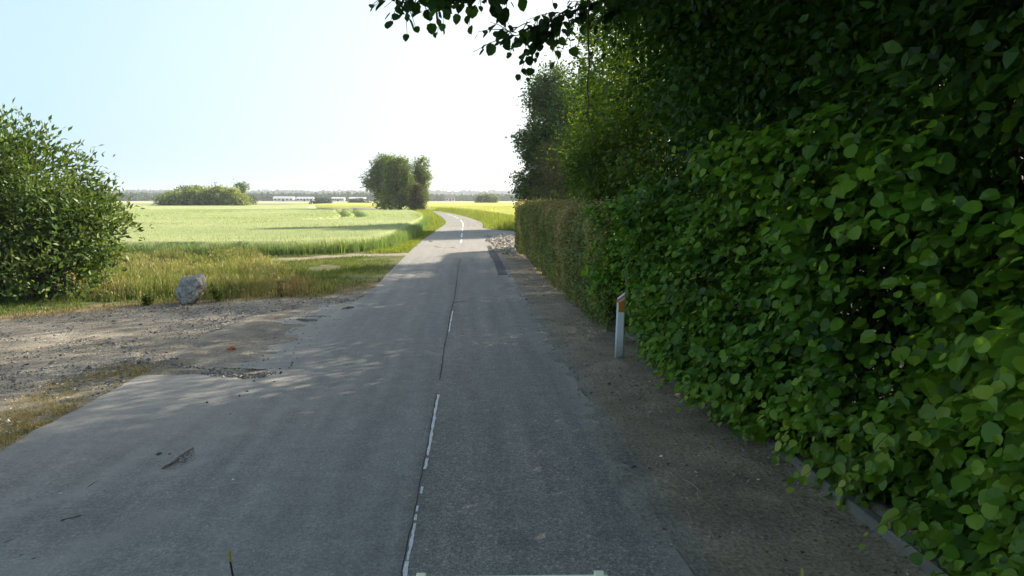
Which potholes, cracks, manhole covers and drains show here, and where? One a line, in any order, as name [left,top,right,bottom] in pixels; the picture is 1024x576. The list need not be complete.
pothole [161,447,196,470]
